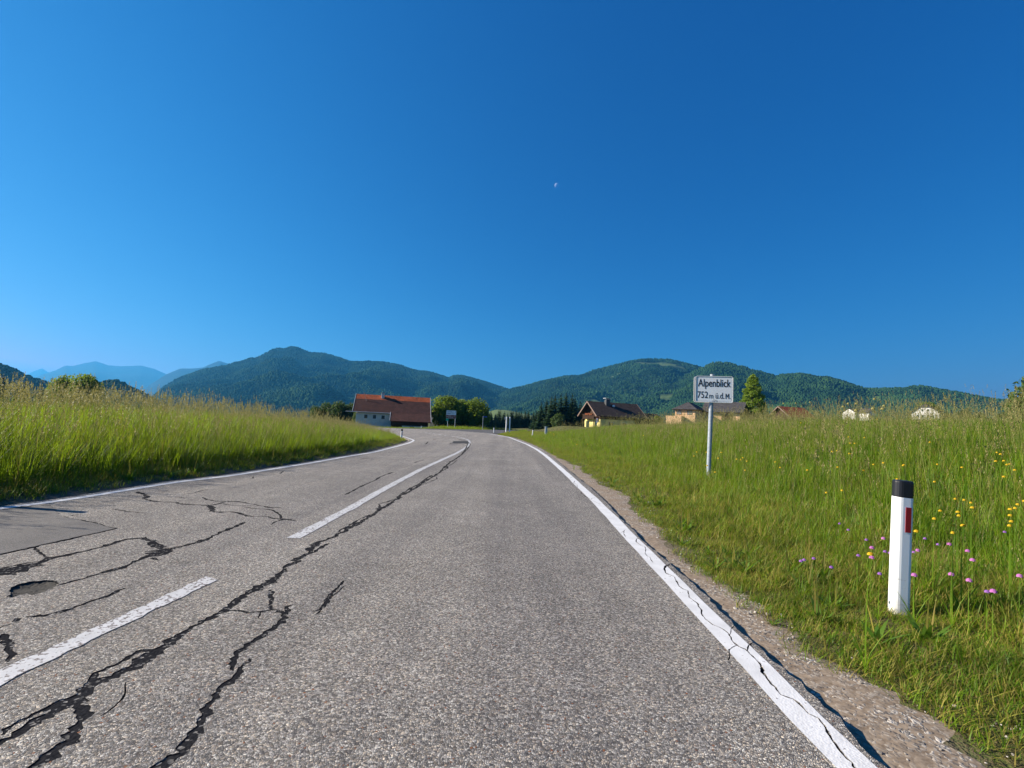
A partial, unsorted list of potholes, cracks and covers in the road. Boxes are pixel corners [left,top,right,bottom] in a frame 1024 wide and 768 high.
crack [623,530,855,768]
crack [0,432,471,768]
pothole [7,580,59,598]
